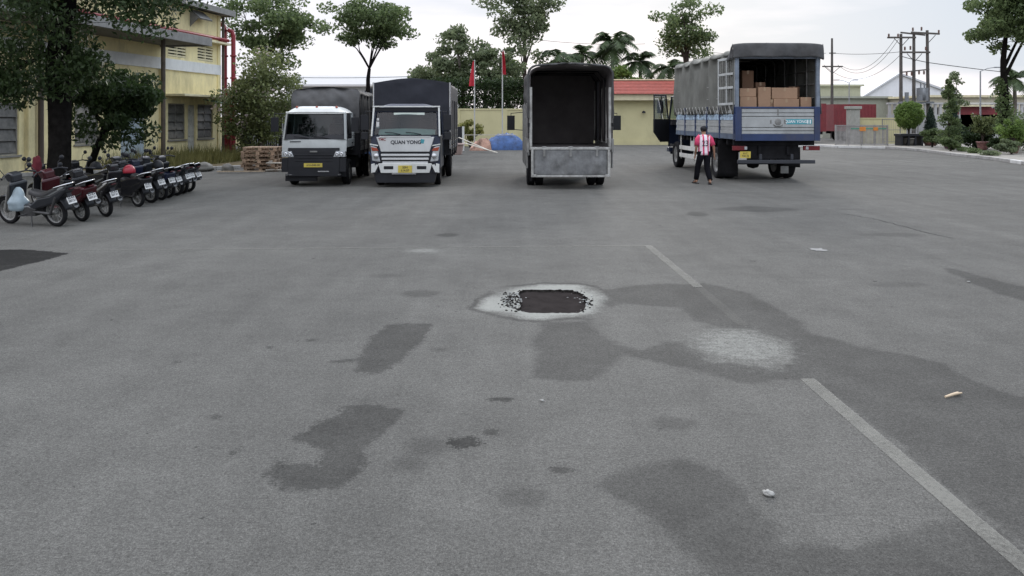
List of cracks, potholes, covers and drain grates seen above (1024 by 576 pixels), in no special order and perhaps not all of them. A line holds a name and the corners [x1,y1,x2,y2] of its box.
pothole [498,289,593,313]
